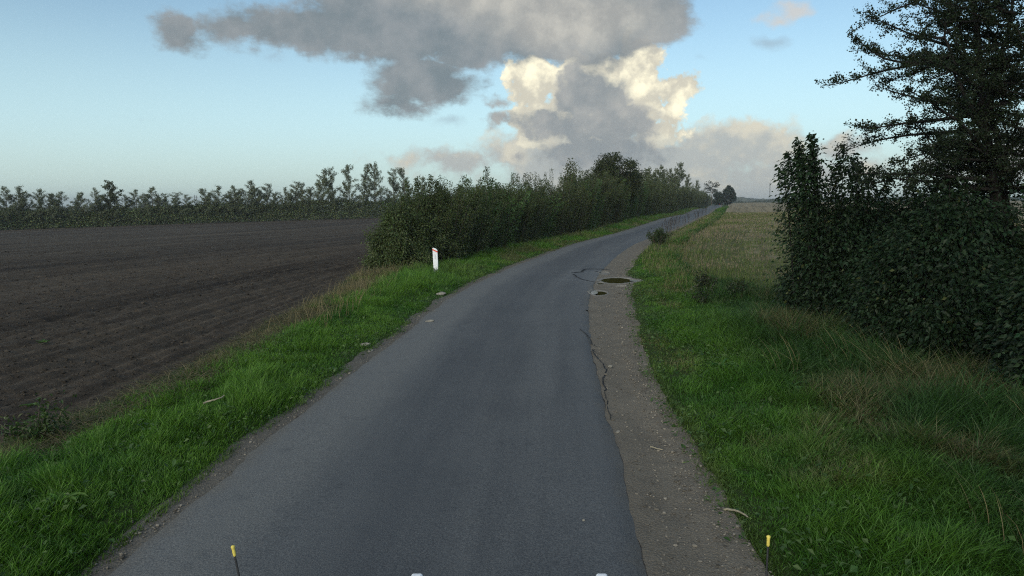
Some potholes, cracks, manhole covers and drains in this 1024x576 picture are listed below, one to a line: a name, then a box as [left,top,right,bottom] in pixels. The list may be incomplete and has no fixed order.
crack [580,329,611,420]
